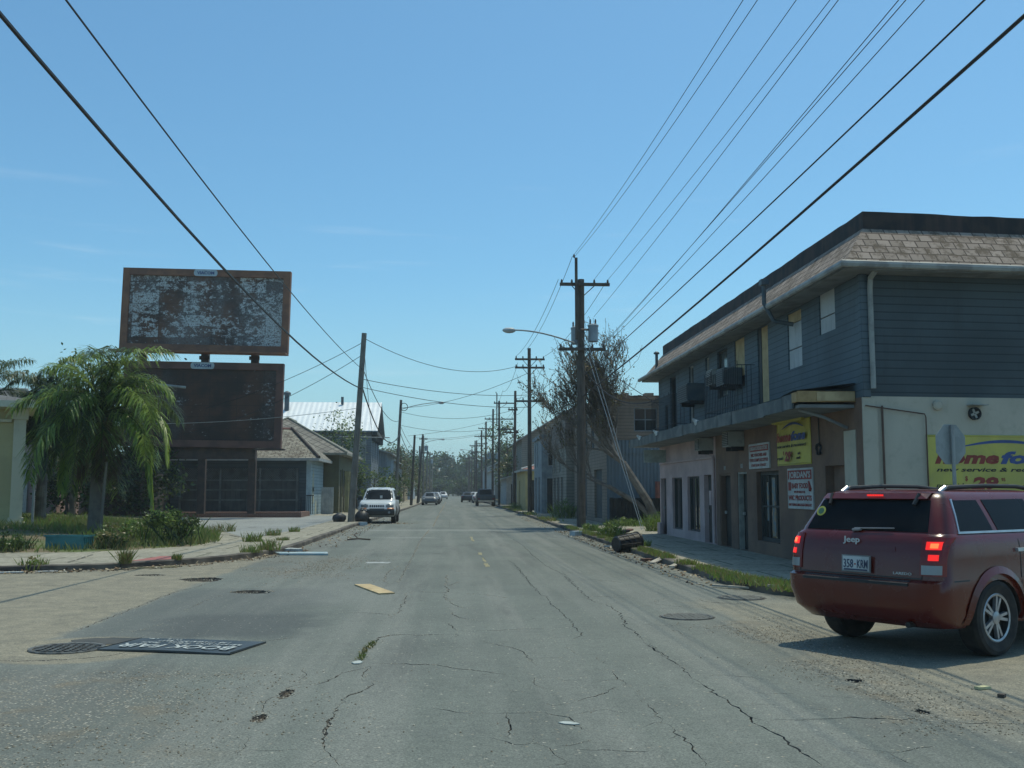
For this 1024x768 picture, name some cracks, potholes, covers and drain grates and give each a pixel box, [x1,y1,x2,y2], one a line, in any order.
manhole cover [659,613,715,621]
crack [505,535,1005,766]
crack [255,502,709,767]
pothole [276,687,296,699]
pothole [250,712,269,723]
